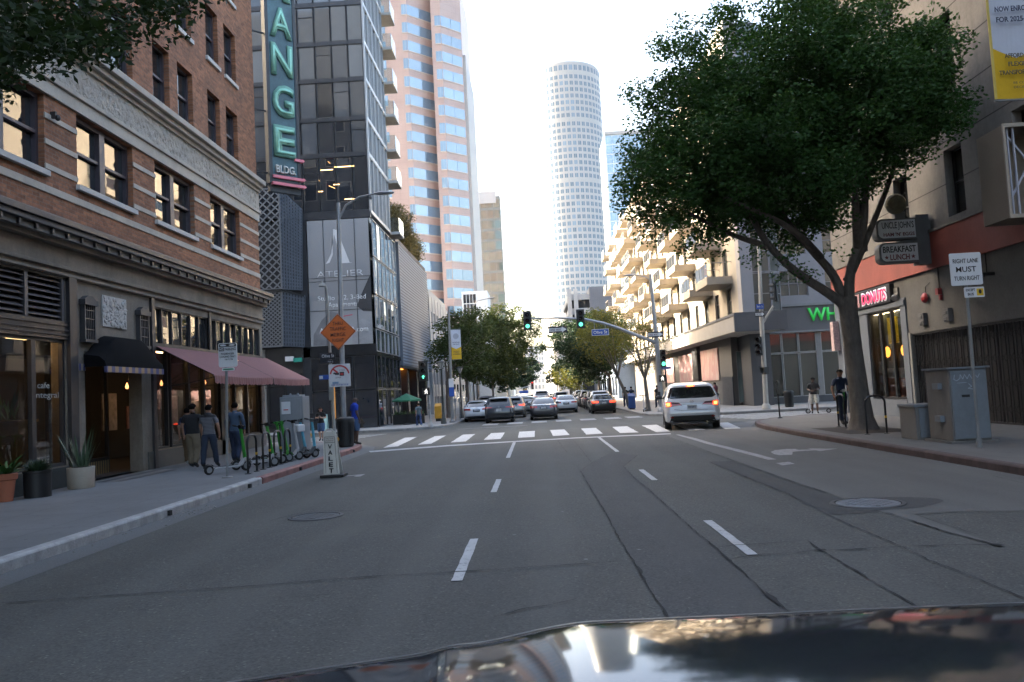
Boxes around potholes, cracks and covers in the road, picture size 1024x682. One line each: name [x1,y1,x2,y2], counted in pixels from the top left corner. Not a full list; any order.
manhole cover [288,512,344,521]
manhole cover [830,497,907,509]
crack [560,440,1024,617]
